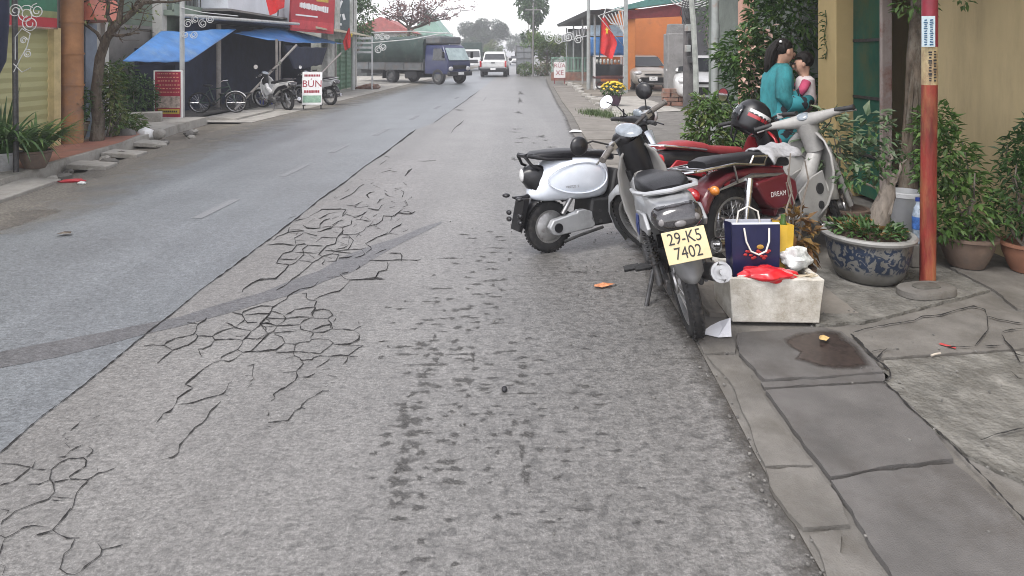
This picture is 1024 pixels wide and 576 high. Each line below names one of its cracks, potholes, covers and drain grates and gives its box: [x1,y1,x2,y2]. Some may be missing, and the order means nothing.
crack [144,156,417,460]
crack [0,415,127,575]
